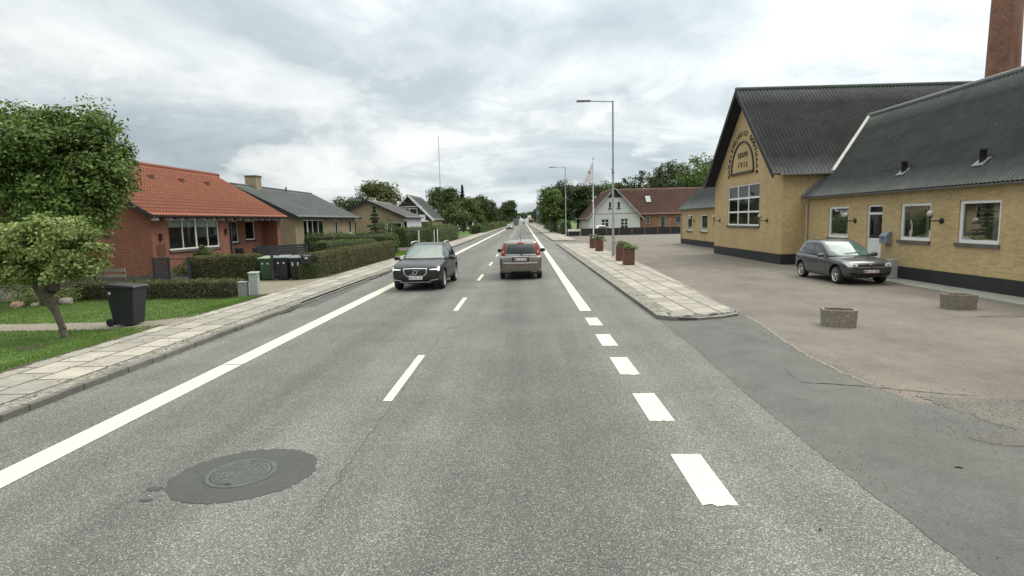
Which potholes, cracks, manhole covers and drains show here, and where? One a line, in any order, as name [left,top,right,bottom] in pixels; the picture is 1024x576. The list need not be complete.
manhole cover [203,458,278,488]
crack [786,370,978,396]
